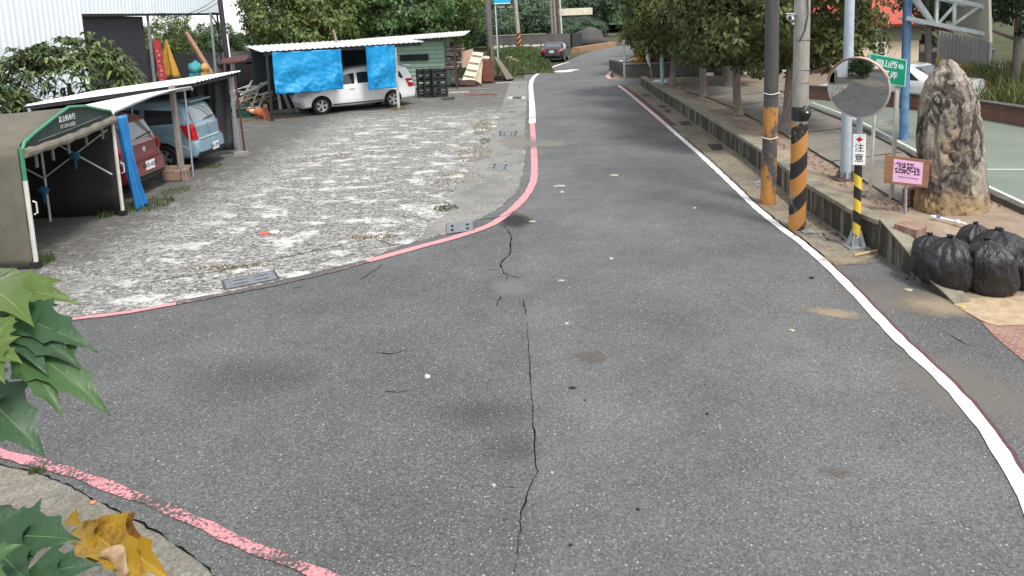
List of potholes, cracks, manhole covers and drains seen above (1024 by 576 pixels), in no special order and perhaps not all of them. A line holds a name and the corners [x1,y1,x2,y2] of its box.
crack [477,211,519,305]
crack [506,300,538,573]
